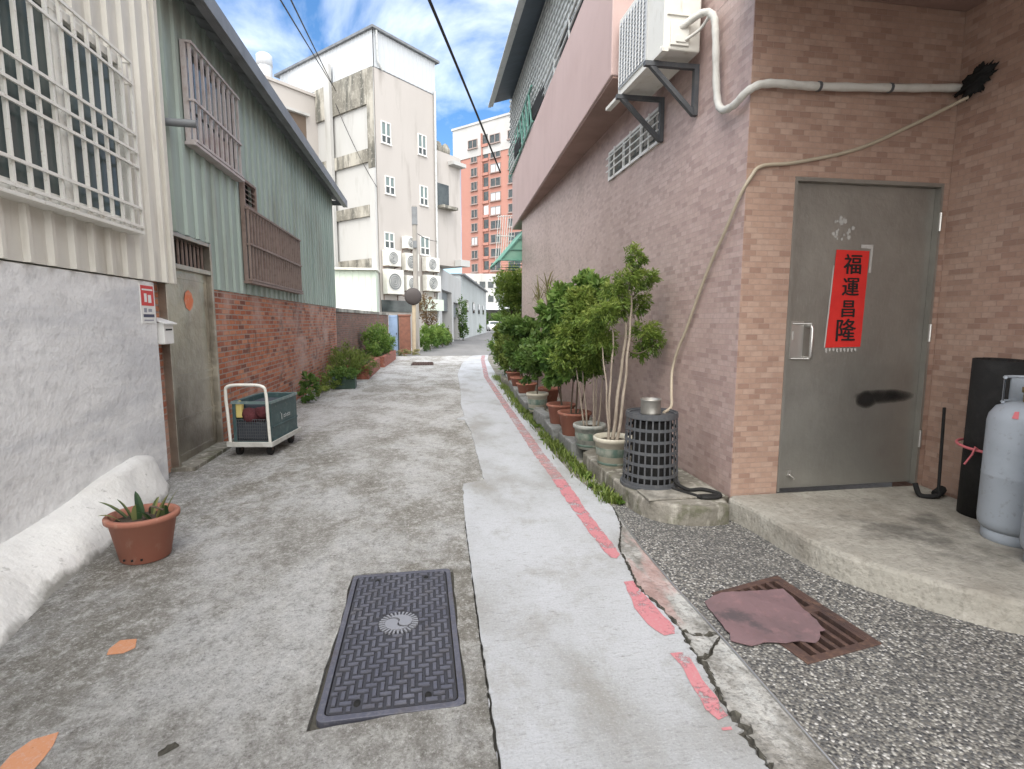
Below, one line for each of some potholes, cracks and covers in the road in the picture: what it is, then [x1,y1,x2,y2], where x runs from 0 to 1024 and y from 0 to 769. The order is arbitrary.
crack [613,507,774,769]
drain grate [711,575,882,665]
manhole cover [308,569,467,731]
